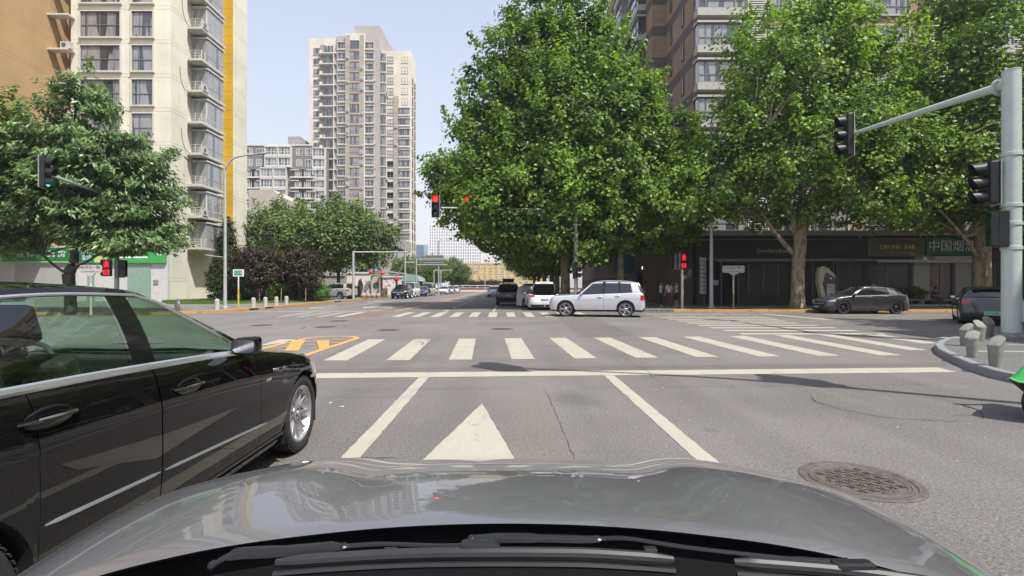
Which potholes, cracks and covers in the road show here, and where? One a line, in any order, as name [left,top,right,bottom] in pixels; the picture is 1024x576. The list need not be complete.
manhole cover [798,461,929,503]
